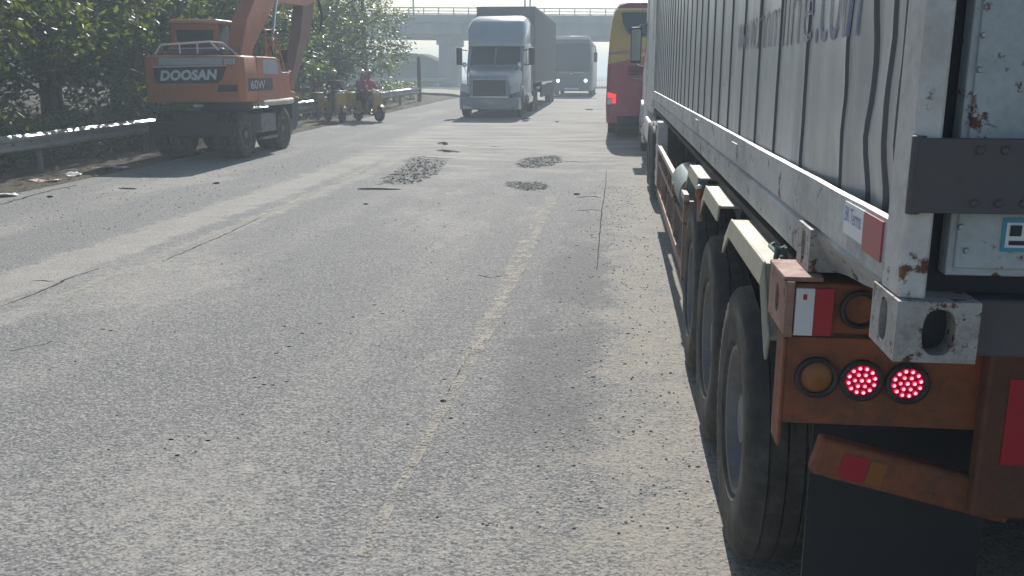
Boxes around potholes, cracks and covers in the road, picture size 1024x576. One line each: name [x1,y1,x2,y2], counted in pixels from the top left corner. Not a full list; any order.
crack [162,218,259,262]
pothole [376,156,450,186]
crack [2,268,98,306]
crack [578,170,607,270]
pothole [514,155,564,169]
